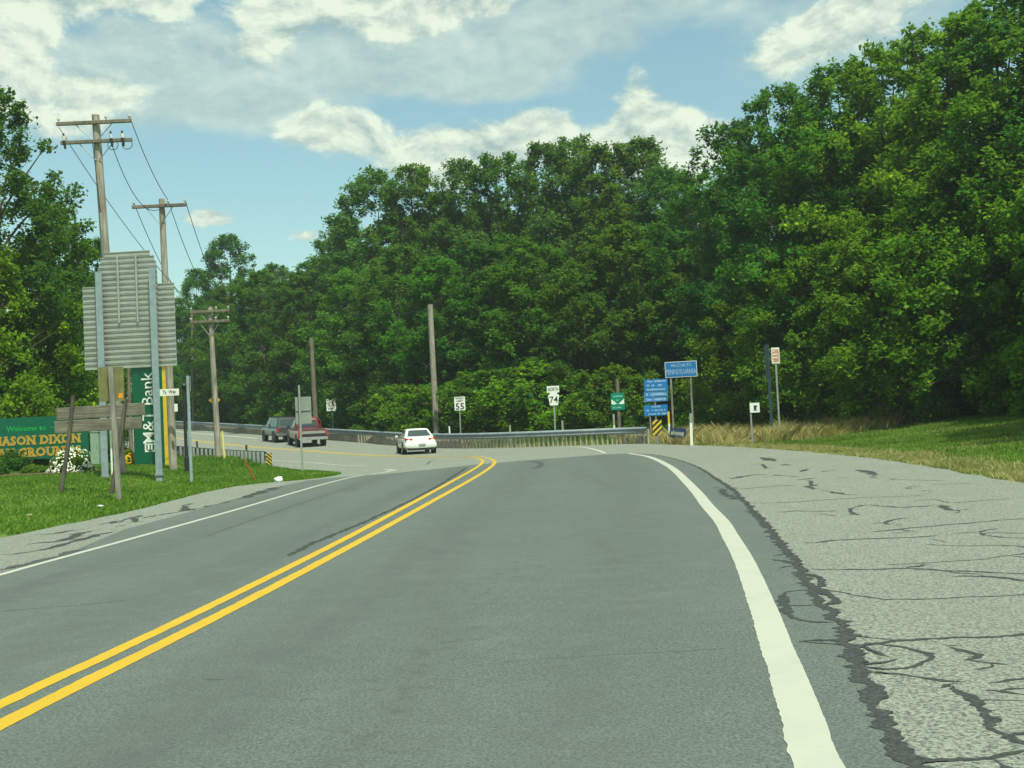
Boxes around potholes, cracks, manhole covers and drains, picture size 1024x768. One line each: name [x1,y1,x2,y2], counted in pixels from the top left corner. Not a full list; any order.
crack [947,645,1024,694]
crack [730,457,1024,581]
